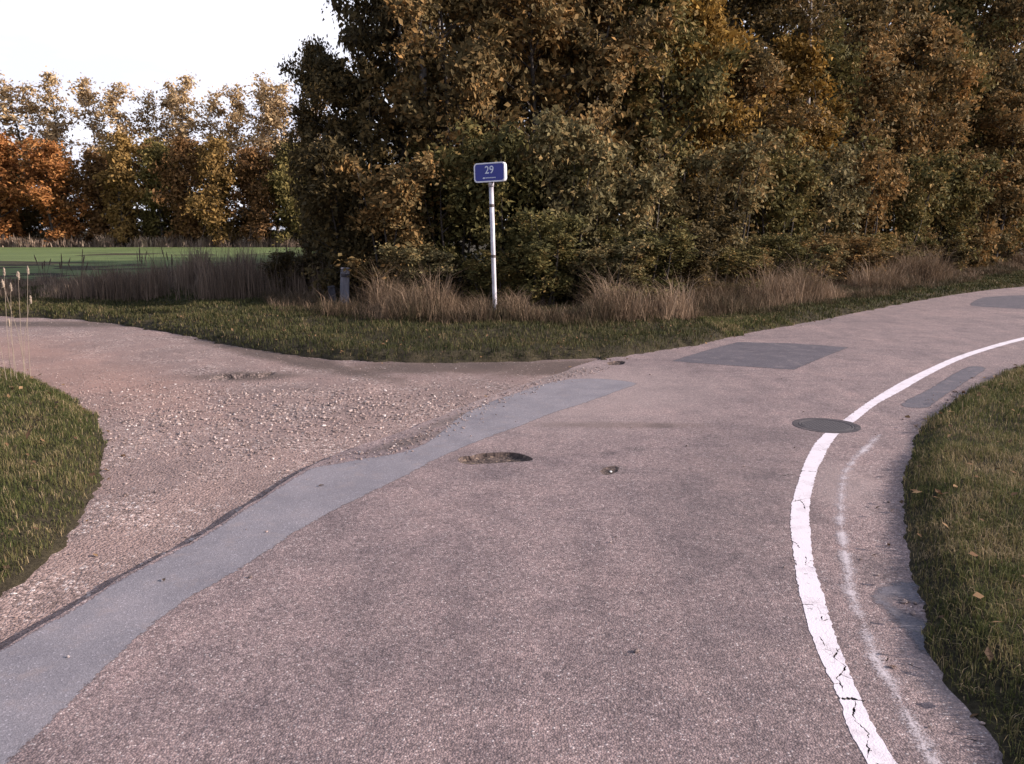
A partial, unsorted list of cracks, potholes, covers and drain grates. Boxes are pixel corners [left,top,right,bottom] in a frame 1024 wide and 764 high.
manhole cover [792,418,861,433]
pothole [208,372,276,380]
pothole [458,452,533,465]
crack [820,638,870,758]
pothole [600,466,619,475]
